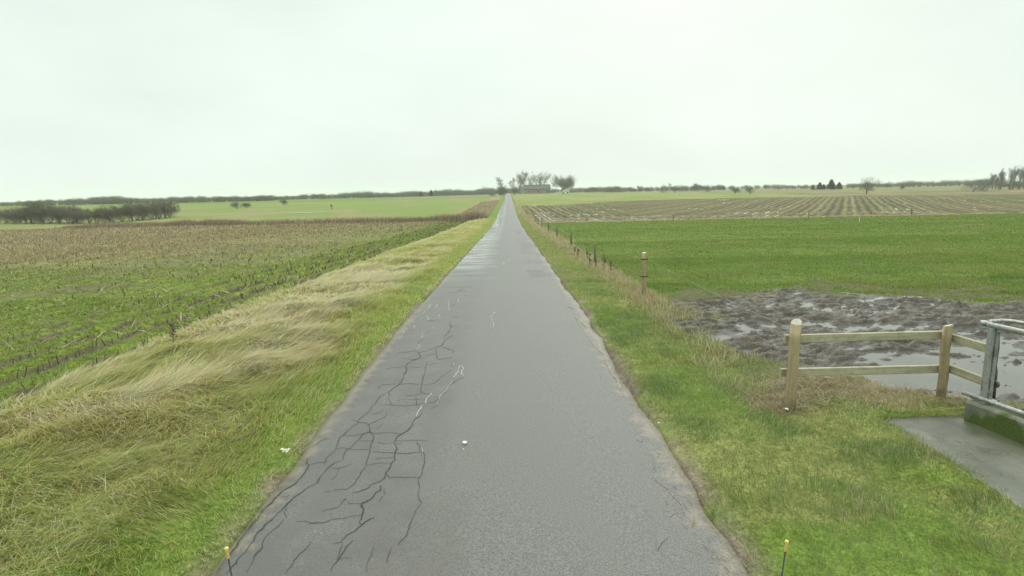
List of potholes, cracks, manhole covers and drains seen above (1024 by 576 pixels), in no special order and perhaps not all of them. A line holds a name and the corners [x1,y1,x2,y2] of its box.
crack [216,270,474,573]
